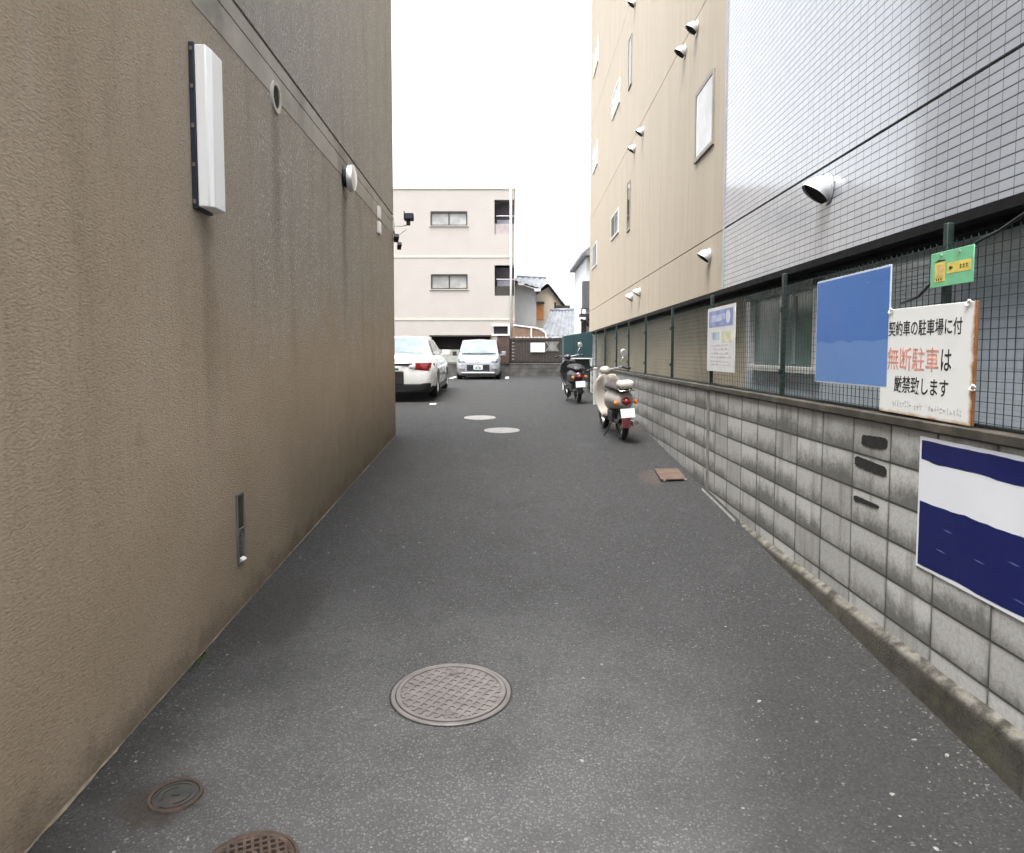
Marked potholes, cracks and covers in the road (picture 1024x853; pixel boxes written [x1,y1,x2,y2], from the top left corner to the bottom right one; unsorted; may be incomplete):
manhole cover [389,663,513,727]
utility cover [147,778,204,814]
